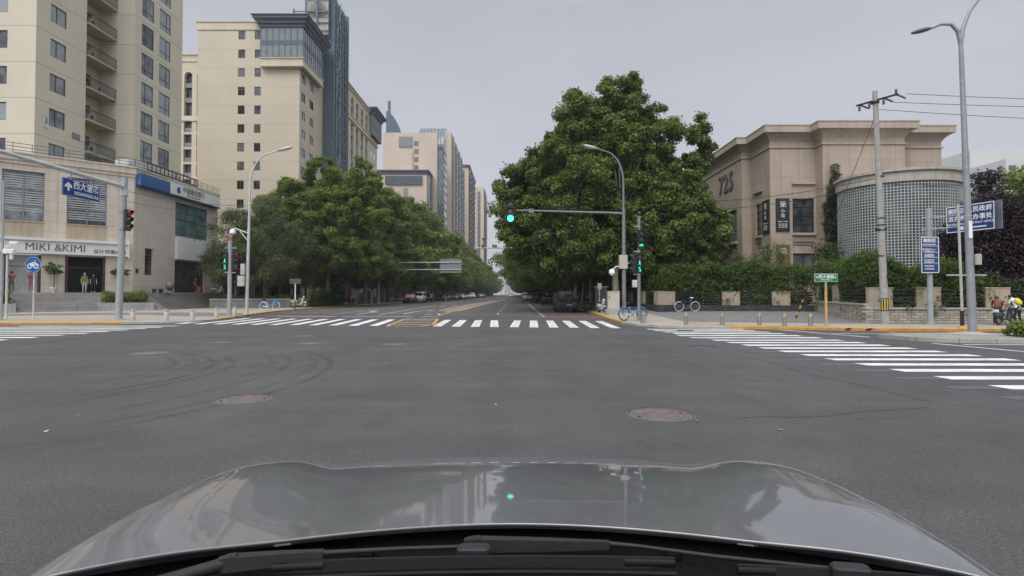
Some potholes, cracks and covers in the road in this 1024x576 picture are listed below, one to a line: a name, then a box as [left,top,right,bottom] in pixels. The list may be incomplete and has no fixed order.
manhole cover [212,394,273,404]
manhole cover [626,408,696,421]
crack [725,353,927,419]
